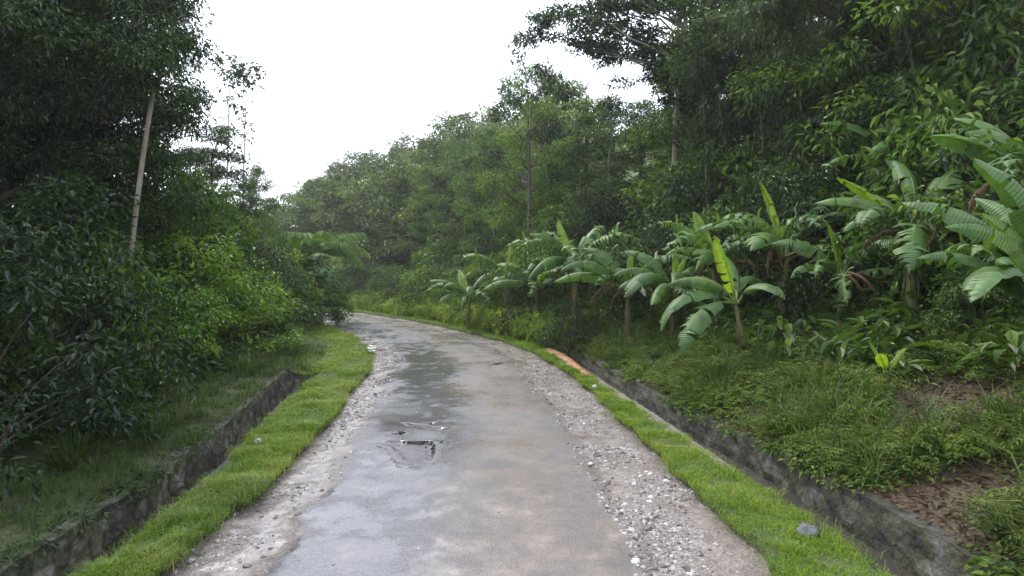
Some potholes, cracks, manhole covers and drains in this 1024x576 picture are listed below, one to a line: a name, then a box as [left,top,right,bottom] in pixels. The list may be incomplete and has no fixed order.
pothole [375,439,443,470]
